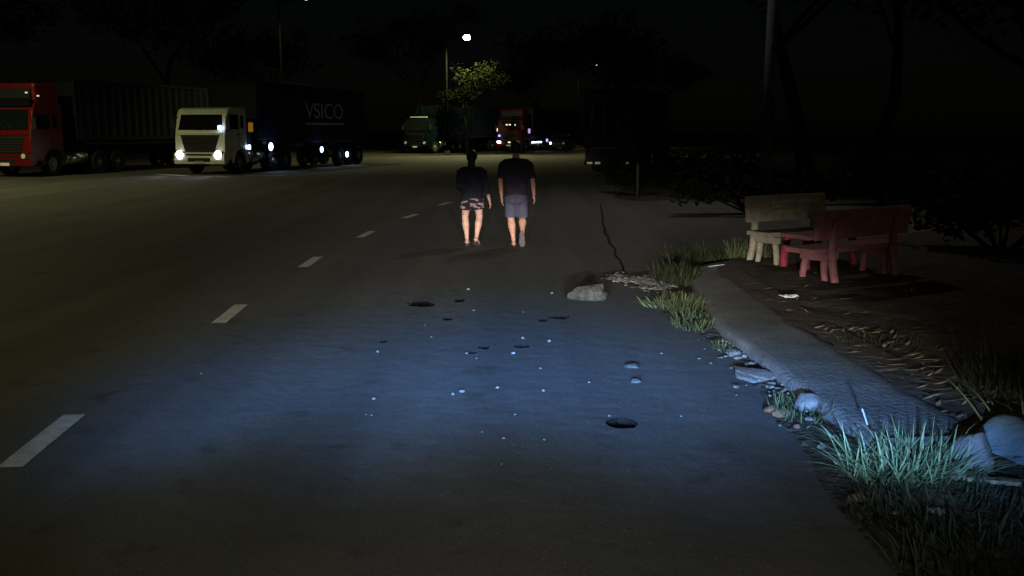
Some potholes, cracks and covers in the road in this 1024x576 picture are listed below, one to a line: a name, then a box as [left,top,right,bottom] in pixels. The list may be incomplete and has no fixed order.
pothole [605,417,638,429]
crack [600,204,628,274]
